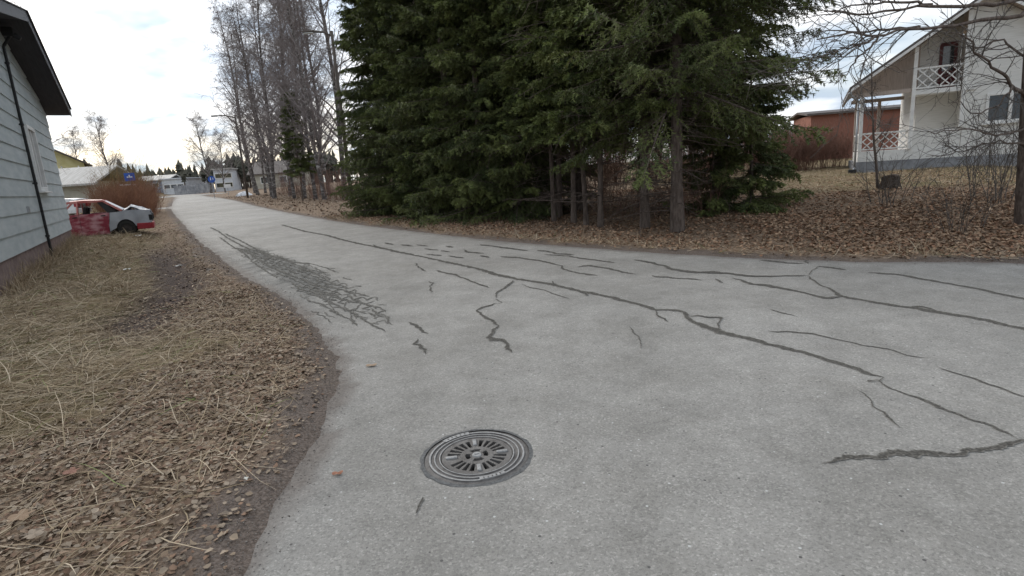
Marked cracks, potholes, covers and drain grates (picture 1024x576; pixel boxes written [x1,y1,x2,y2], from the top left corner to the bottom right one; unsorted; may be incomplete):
manhole cover [420,429,533,487]
crack [210,225,1024,463]
